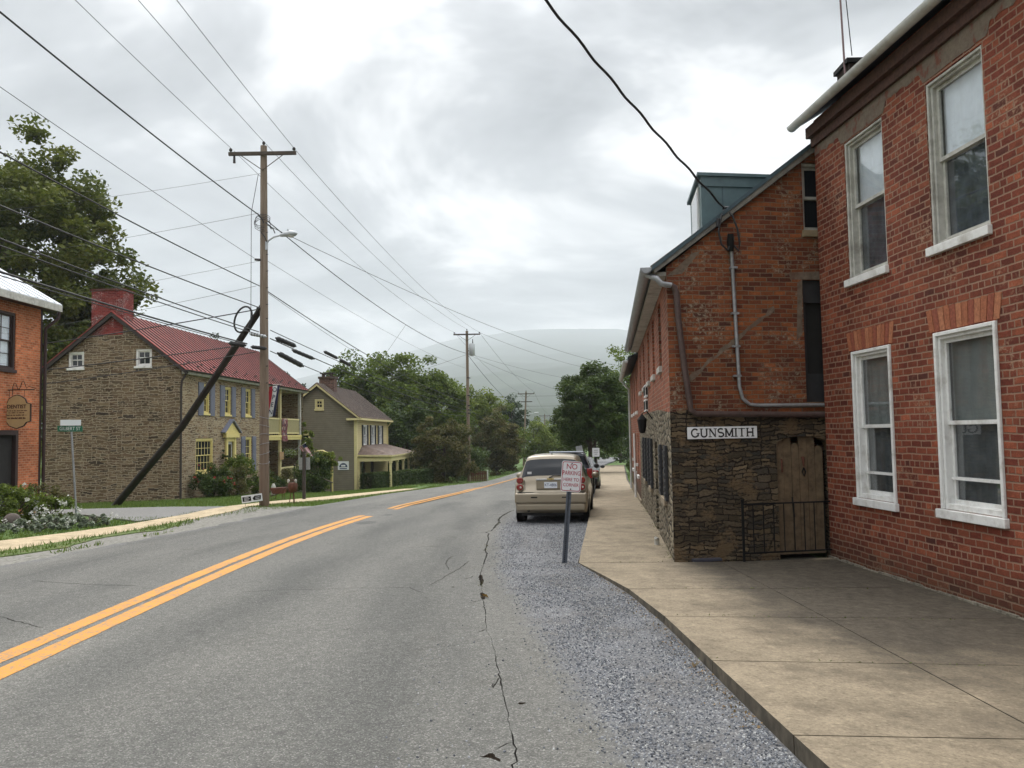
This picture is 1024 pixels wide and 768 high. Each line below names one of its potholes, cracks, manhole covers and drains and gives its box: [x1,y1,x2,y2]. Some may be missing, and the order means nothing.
crack [239,510,518,768]
